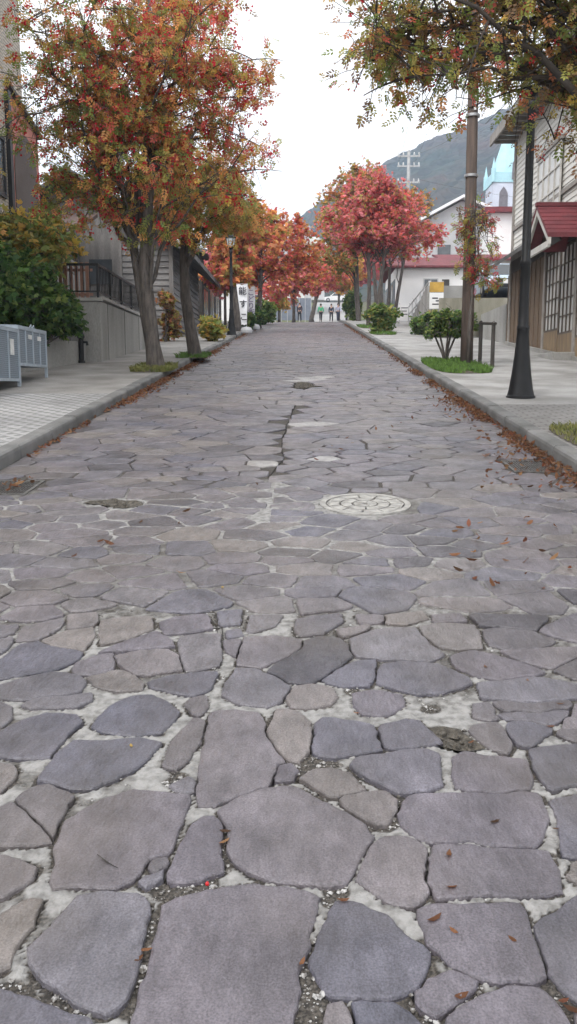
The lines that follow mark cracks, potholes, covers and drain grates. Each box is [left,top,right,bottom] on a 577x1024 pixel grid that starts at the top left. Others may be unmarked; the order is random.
pothole [85,498,143,509]
drain grate [0,480,45,495]
manhole cover [320,493,411,516]
drain grate [501,460,559,473]
pothole [428,726,485,752]
